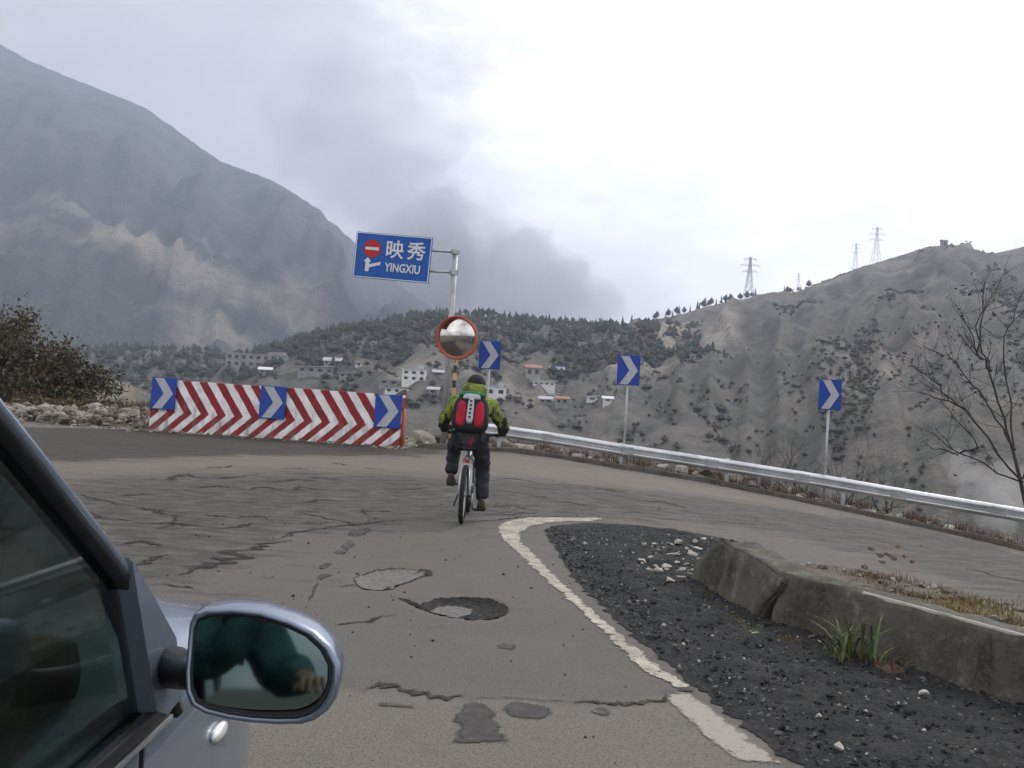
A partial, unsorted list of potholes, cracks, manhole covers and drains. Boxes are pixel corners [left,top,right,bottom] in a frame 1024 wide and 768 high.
crack [81,463,1024,589]
crack [331,568,433,626]
crack [365,682,667,706]
pothole [400,597,508,621]
